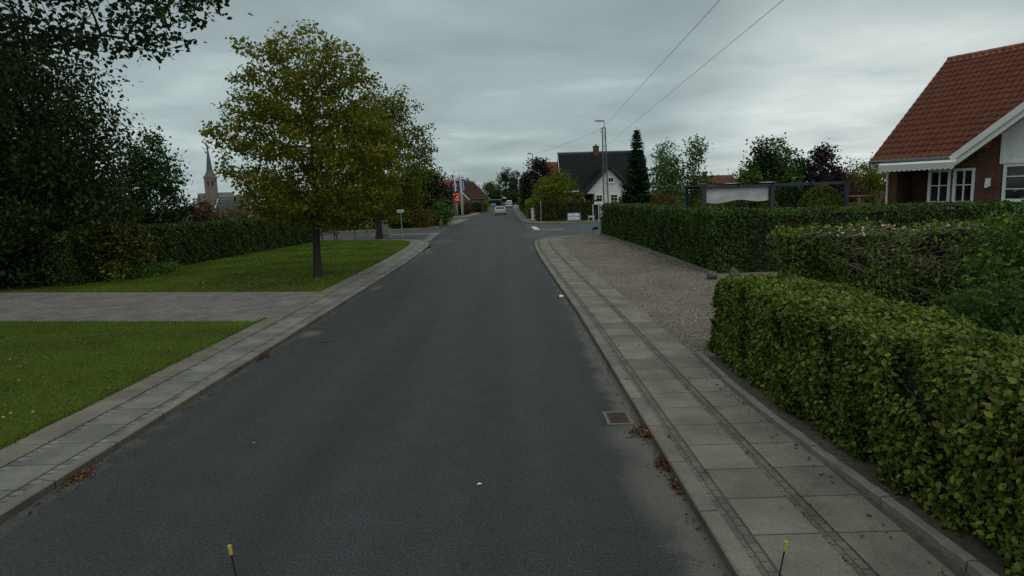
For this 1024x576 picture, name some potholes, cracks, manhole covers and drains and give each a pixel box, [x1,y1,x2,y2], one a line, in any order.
drain grate [602,411,634,425]
